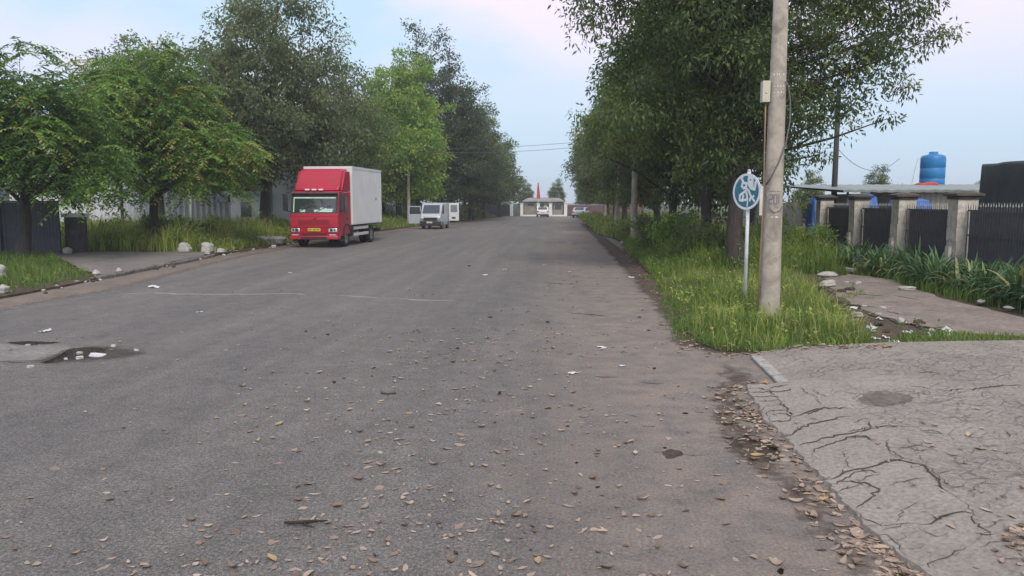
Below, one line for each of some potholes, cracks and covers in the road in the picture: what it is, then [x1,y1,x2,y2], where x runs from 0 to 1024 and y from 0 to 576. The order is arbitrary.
pothole [40,347,107,364]
pothole [662,449,683,459]
crack [756,371,1024,568]
